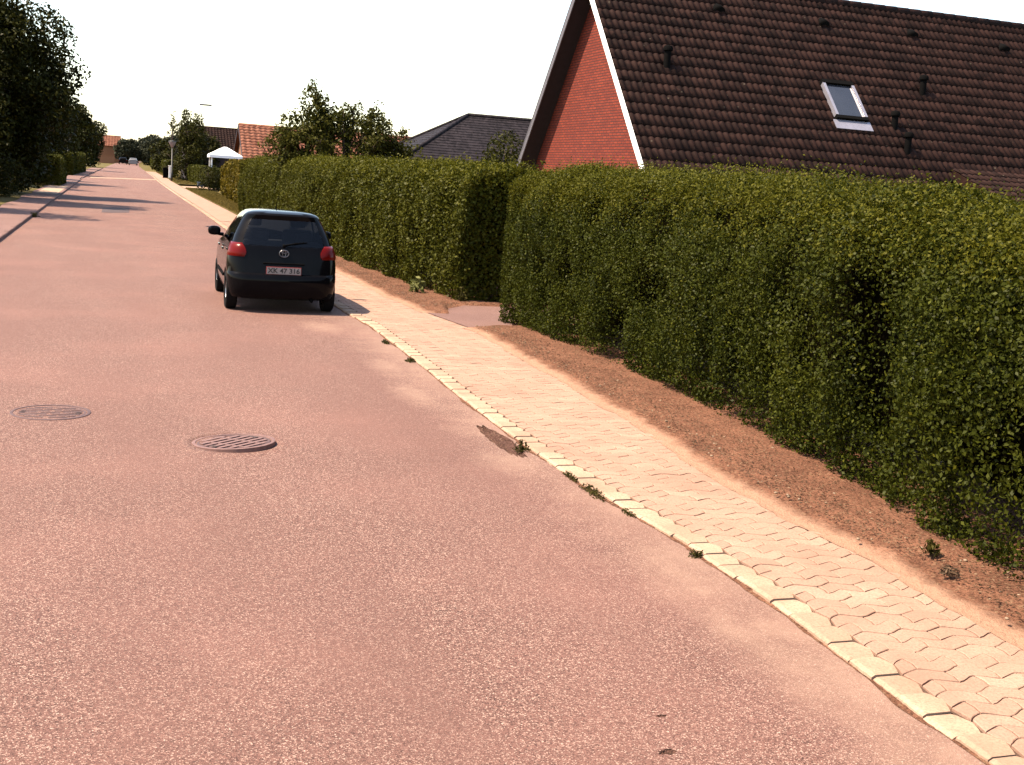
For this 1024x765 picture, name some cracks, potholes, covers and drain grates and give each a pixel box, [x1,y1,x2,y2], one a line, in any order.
manhole cover [9,405,91,420]
